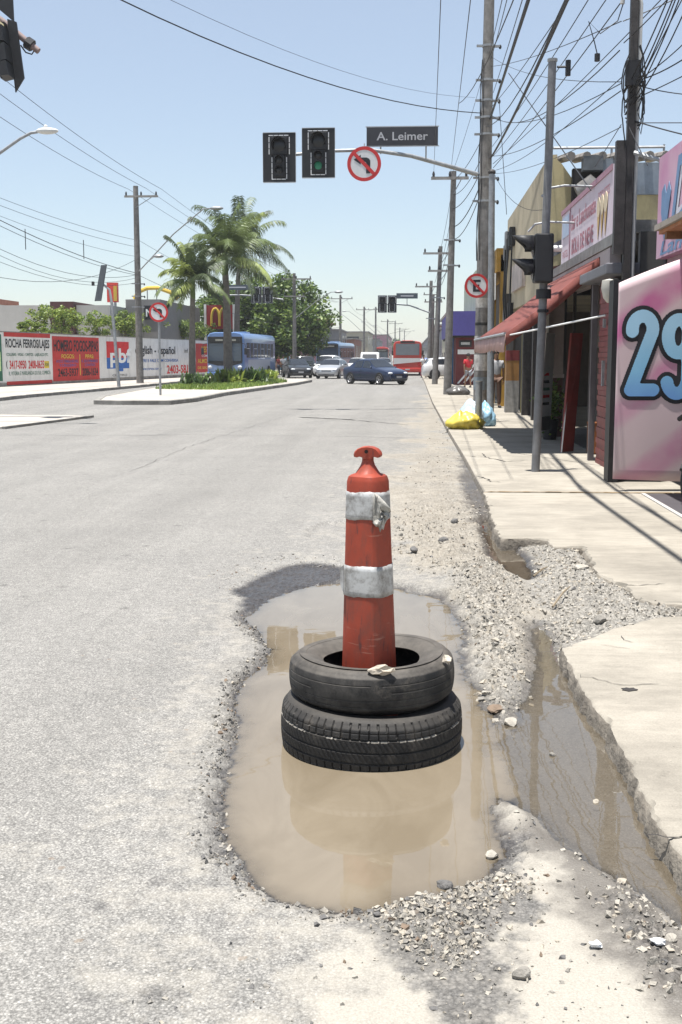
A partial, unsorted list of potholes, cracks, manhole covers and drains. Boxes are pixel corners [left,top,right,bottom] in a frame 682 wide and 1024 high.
pothole [193,561,529,925]
